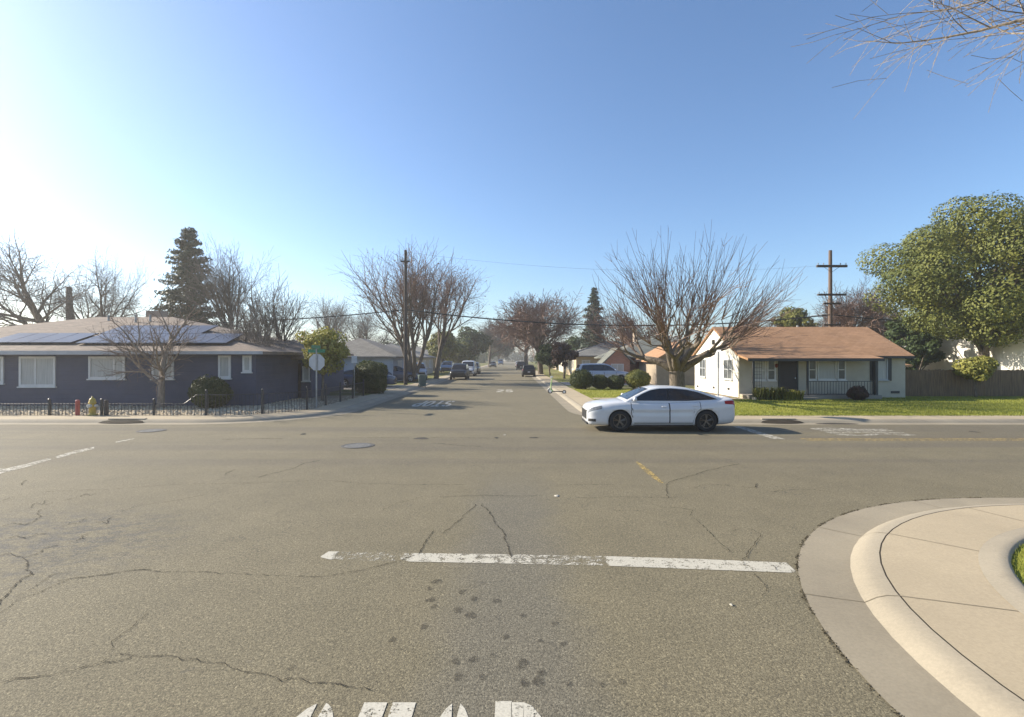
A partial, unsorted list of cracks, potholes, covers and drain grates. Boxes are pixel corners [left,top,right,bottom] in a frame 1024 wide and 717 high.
crack [0,460,512,613]
crack [571,464,821,595]
crack [5,611,371,690]
